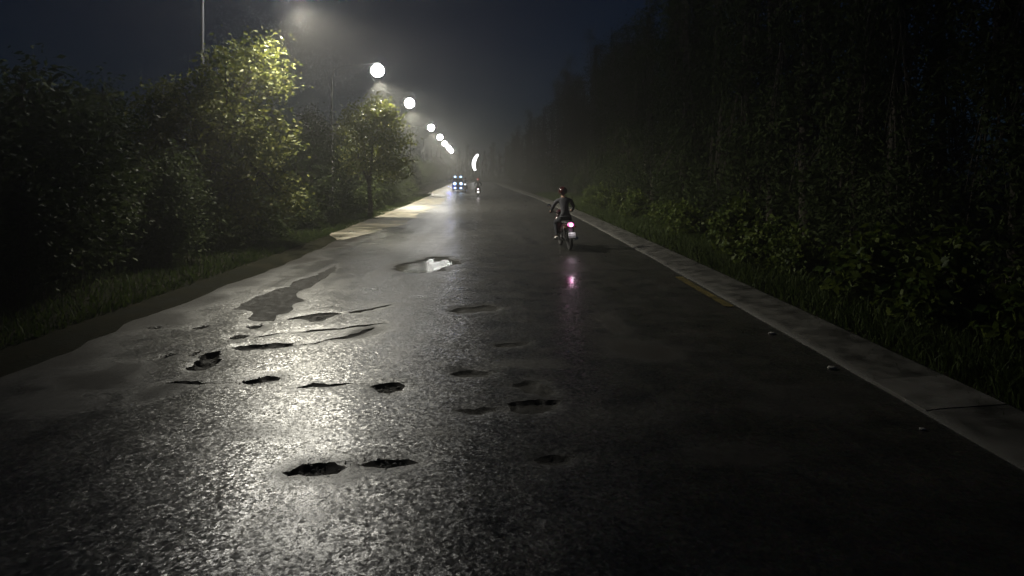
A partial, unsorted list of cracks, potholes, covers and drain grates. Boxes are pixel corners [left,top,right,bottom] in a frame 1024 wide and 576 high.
pothole [231,341,296,351]
crack [258,305,389,345]
pothole [455,407,498,415]
pothole [507,399,562,414]
pothole [534,455,576,466]
pothole [370,379,412,395]
pothole [350,456,418,469]
pothole [186,350,228,371]
pothole [393,257,462,273]
pothole [283,457,359,476]
pothole [235,373,287,385]
